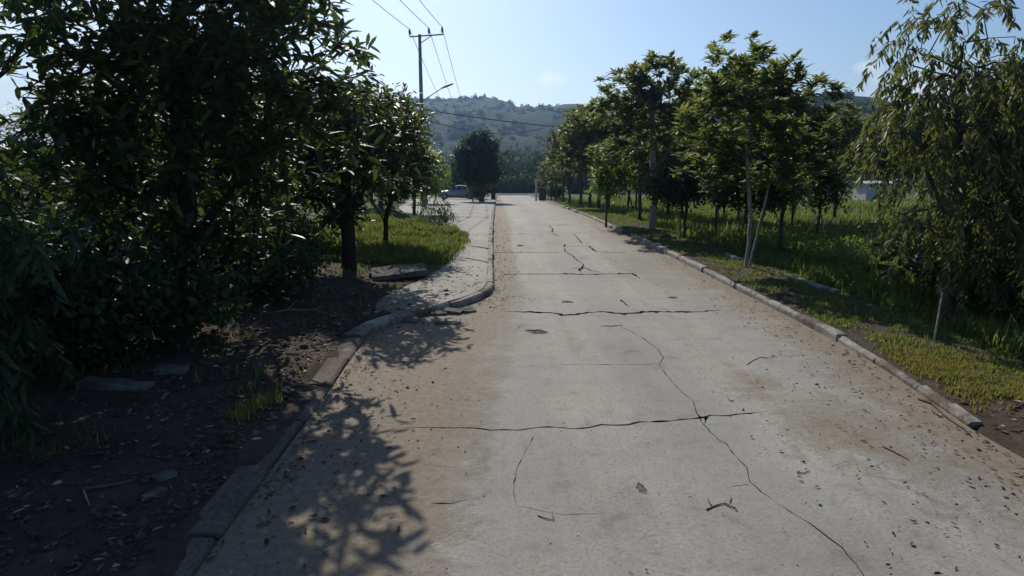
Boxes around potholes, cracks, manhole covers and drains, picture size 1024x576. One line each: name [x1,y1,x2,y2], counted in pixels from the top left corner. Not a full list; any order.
crack [546,224,602,273]
crack [579,319,864,576]
crack [513,436,600,515]
